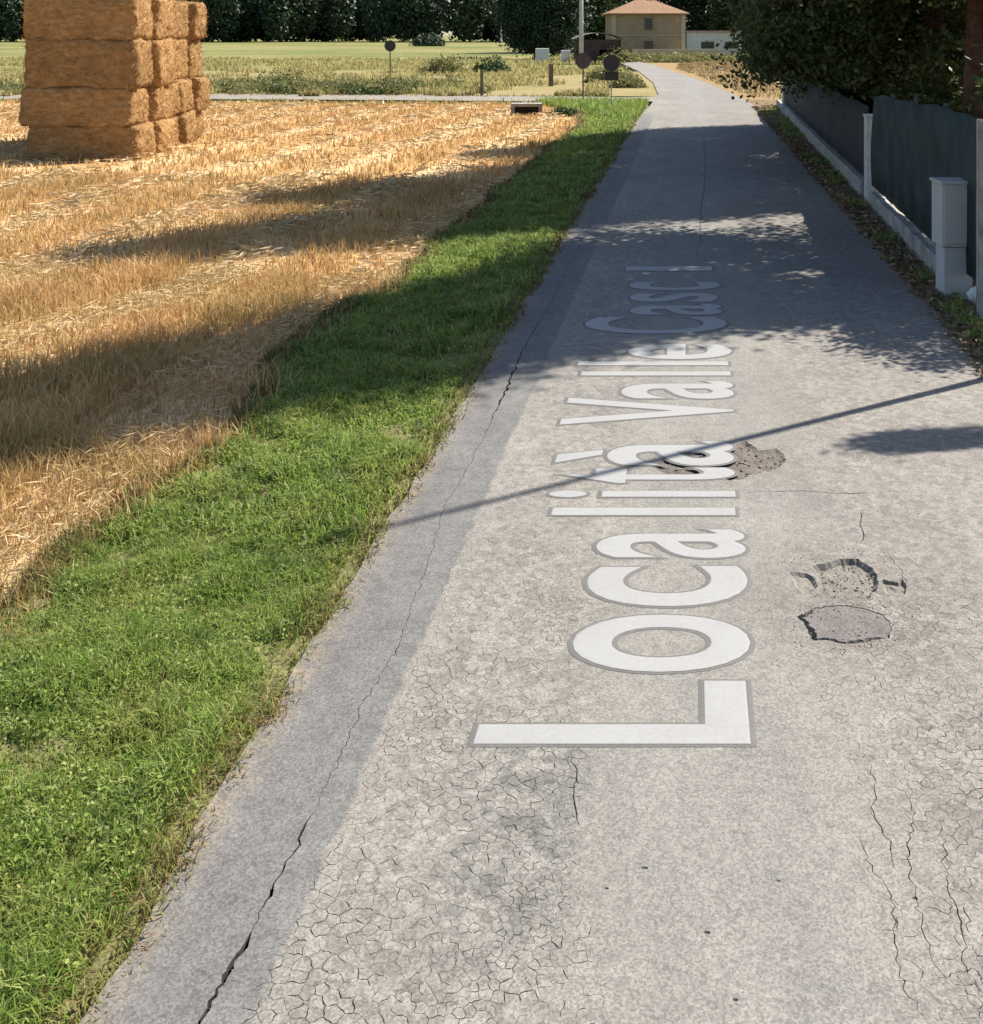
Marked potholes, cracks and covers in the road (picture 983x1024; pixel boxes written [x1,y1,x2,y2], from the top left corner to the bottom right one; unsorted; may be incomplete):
crack [697,136,706,257]
pothole [651,441,787,480]
crack [756,544,983,1024]
pothole [789,546,907,613]
crack [197,157,626,1024]
